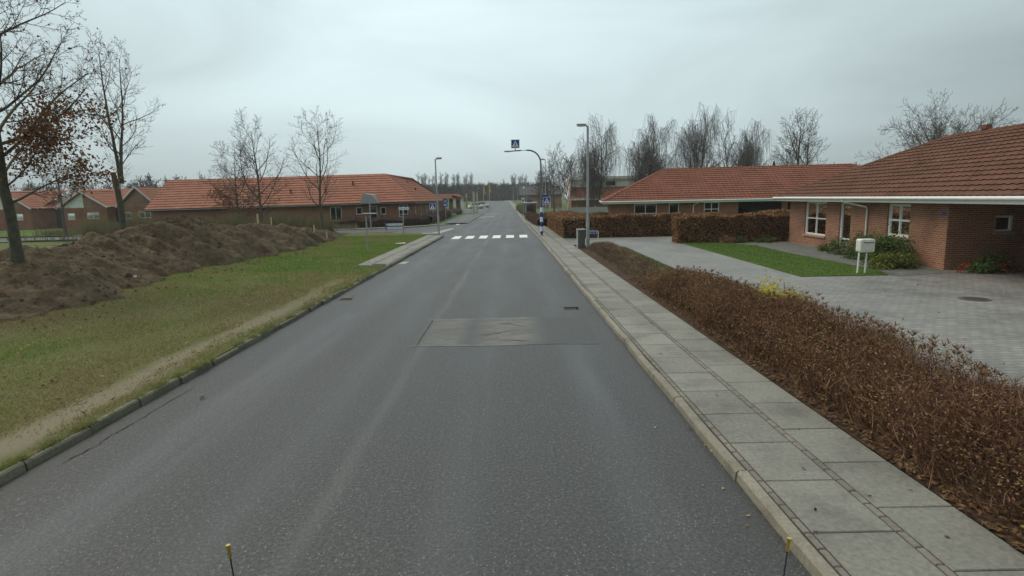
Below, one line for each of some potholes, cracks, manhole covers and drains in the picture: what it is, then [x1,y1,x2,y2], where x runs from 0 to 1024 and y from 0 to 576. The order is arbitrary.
crack [63,388,192,463]
